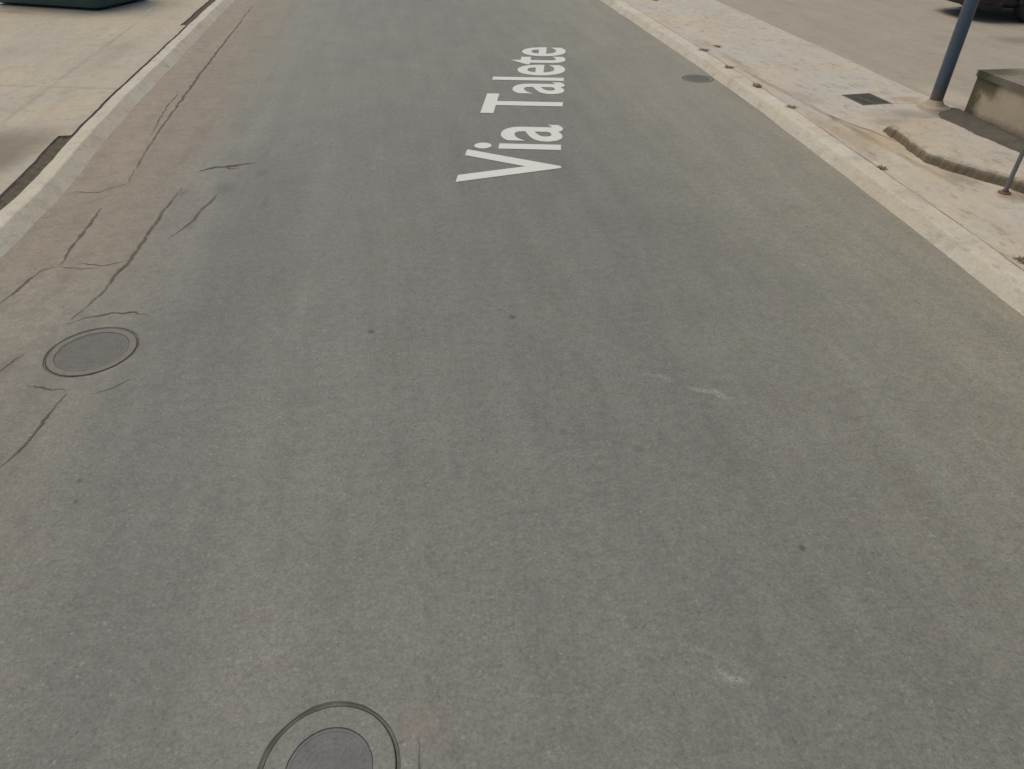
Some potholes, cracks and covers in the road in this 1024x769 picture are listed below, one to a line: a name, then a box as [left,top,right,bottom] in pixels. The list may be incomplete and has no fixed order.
manhole cover [257,701,401,769]
crack [0,162,255,468]
drain grate [842,93,893,106]
manhole cover [42,327,140,378]
manhole cover [682,75,714,83]
